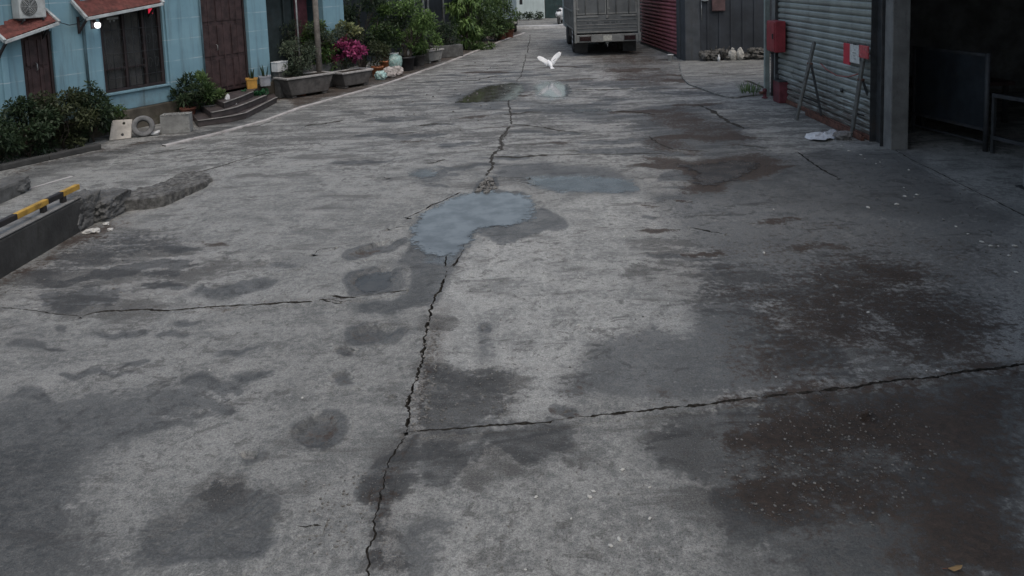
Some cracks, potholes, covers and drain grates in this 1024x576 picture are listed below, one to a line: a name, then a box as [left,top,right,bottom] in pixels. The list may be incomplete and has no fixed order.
crack [697,73,764,148]
crack [454,35,531,82]
crack [312,176,479,576]
crack [793,152,842,179]
